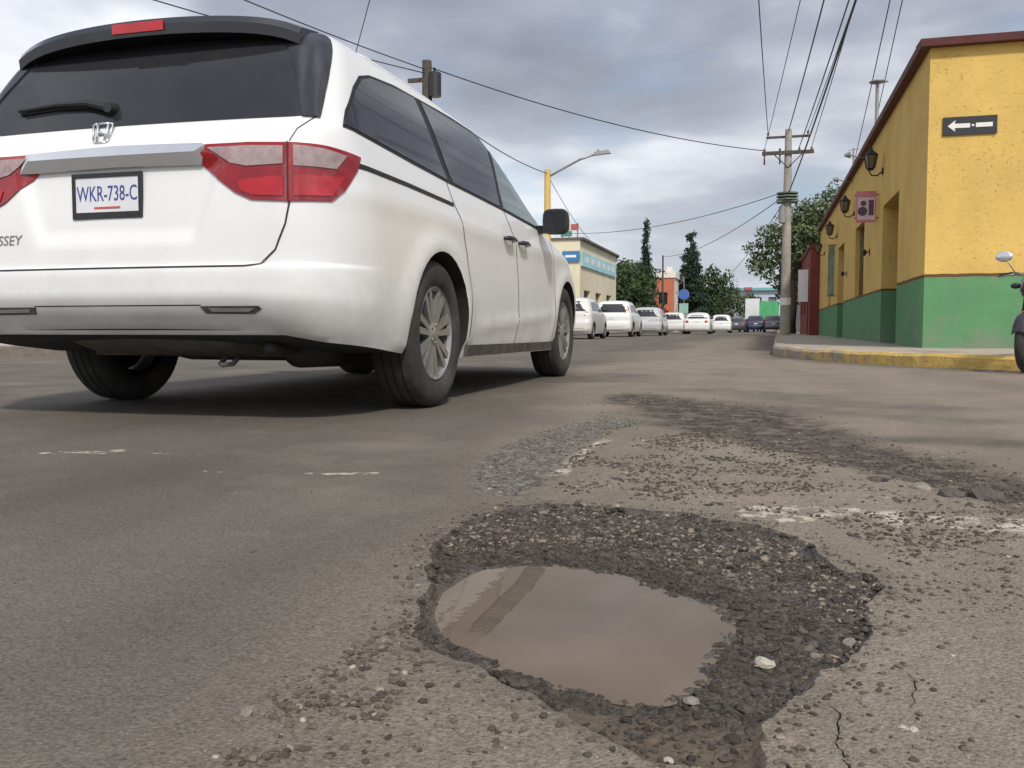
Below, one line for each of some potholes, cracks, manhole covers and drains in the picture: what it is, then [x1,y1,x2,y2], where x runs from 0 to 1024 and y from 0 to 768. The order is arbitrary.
pothole [412,502,886,768]
crack [830,705,851,768]
